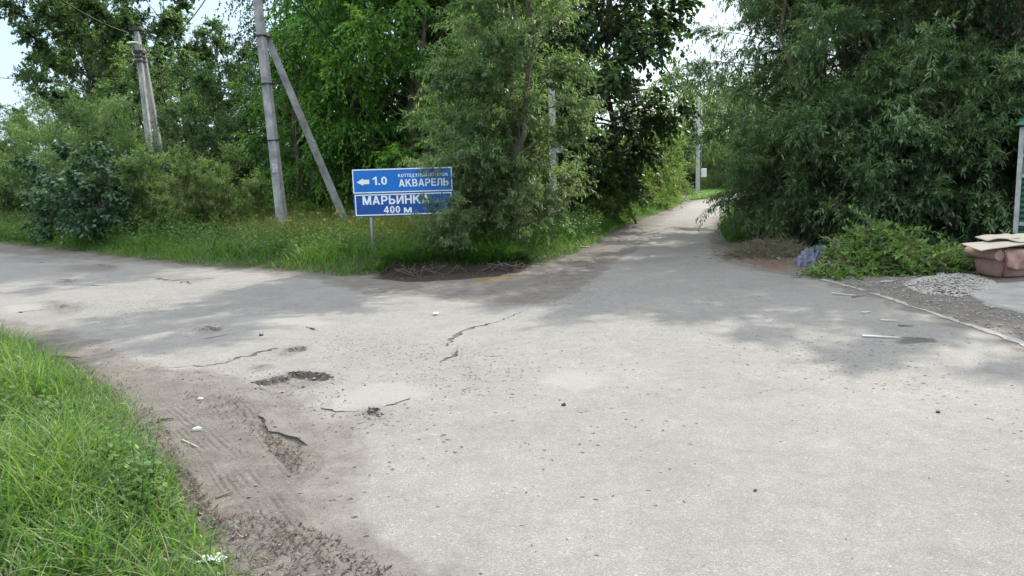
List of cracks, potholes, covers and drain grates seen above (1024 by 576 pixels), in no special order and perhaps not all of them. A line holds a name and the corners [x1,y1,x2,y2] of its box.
crack [439,311,524,362]
crack [171,334,279,368]
crack [321,398,411,412]
pothole [250,371,334,392]
pothole [278,346,307,356]
